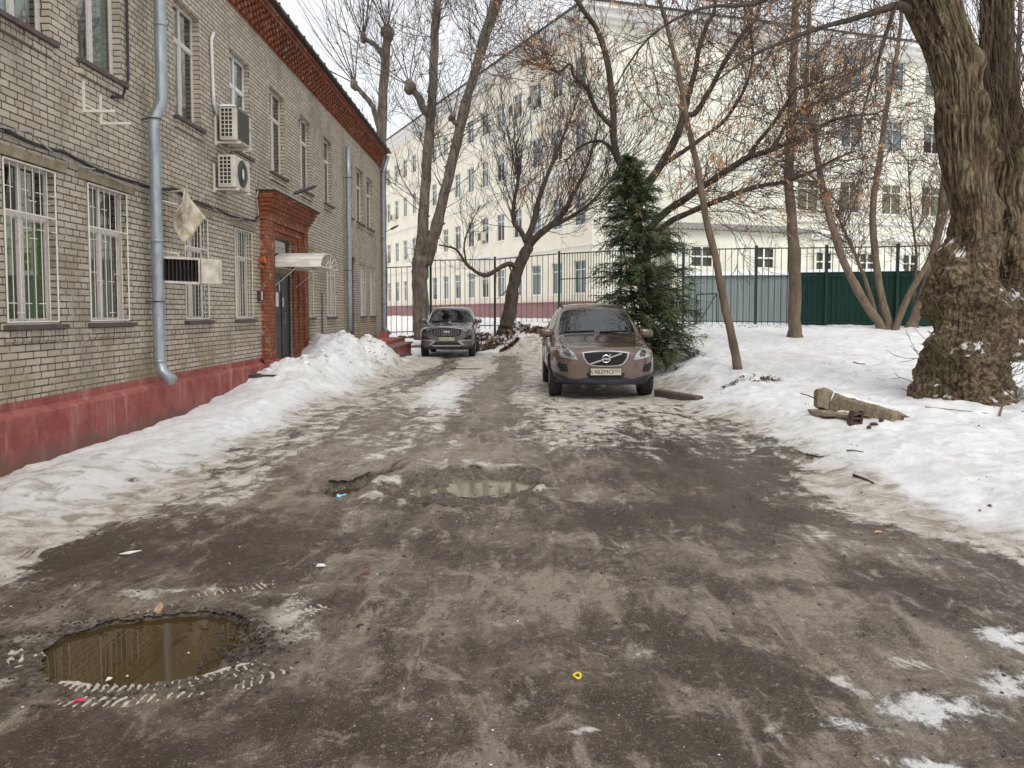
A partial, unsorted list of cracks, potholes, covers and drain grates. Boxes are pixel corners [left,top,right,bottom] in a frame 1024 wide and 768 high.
pothole [17,604,281,698]
pothole [385,463,557,513]
pothole [316,472,373,499]
